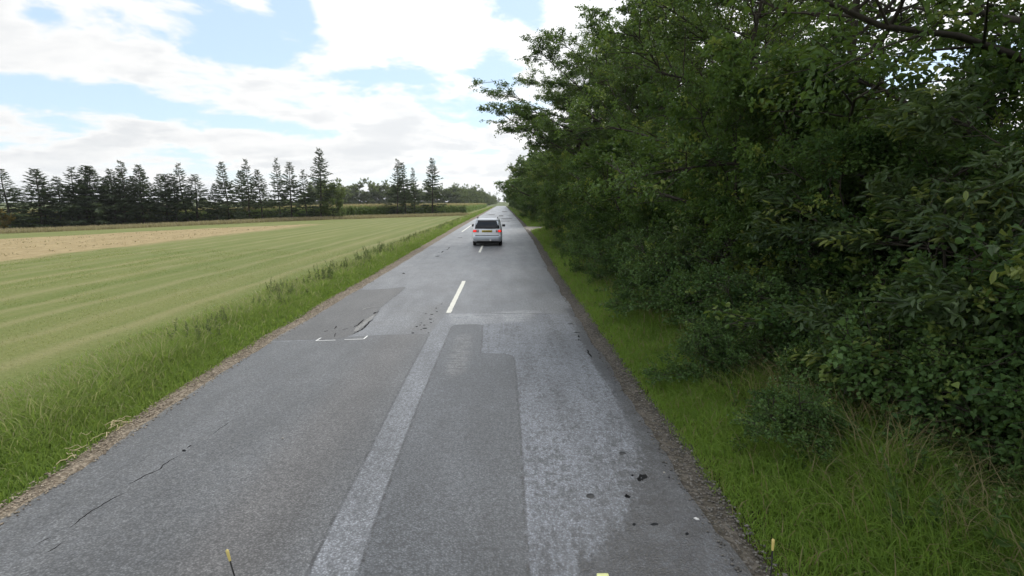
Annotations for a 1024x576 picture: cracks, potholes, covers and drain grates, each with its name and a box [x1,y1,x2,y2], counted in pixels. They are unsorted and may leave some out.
crack [39,445,191,553]
